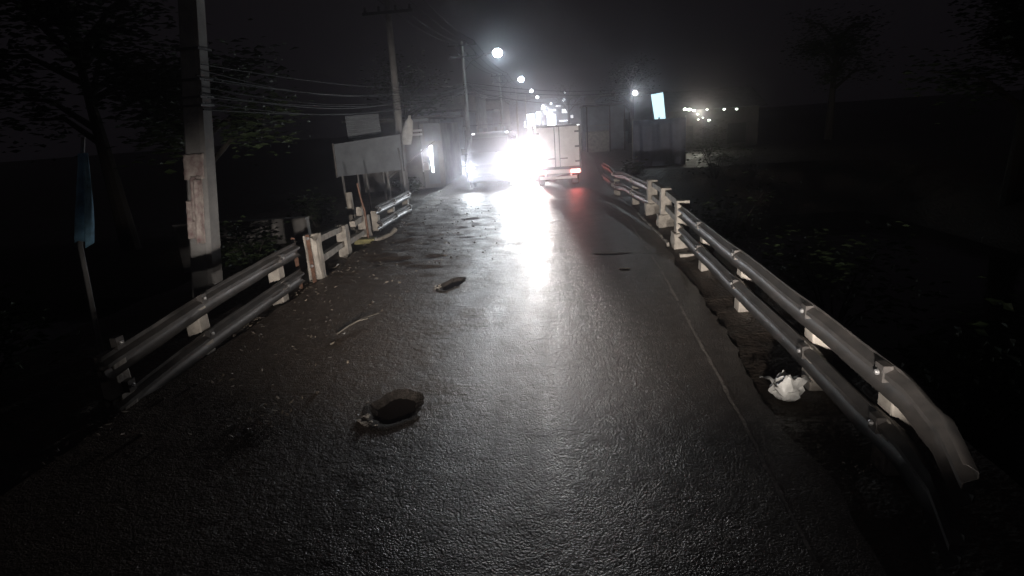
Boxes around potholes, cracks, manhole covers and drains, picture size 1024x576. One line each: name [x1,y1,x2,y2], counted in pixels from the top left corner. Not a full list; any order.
pothole [435,277,466,293]
pothole [356,389,425,432]
